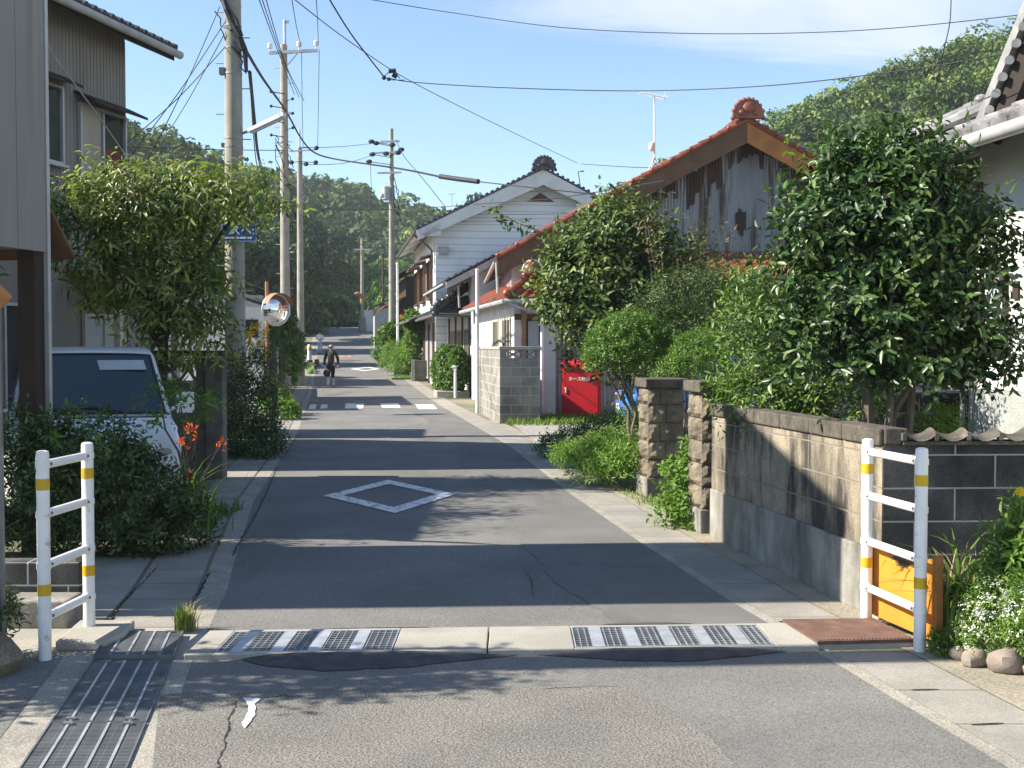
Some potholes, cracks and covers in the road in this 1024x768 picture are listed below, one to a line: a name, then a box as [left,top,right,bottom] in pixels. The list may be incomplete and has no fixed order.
crack [232,467,277,556]
crack [111,567,157,620]
drain grate [215,629,400,653]
drain grate [19,721,146,768]
crack [217,700,238,768]
drain grate [93,630,184,660]
drain grate [571,625,774,648]
drain grate [50,659,172,723]
